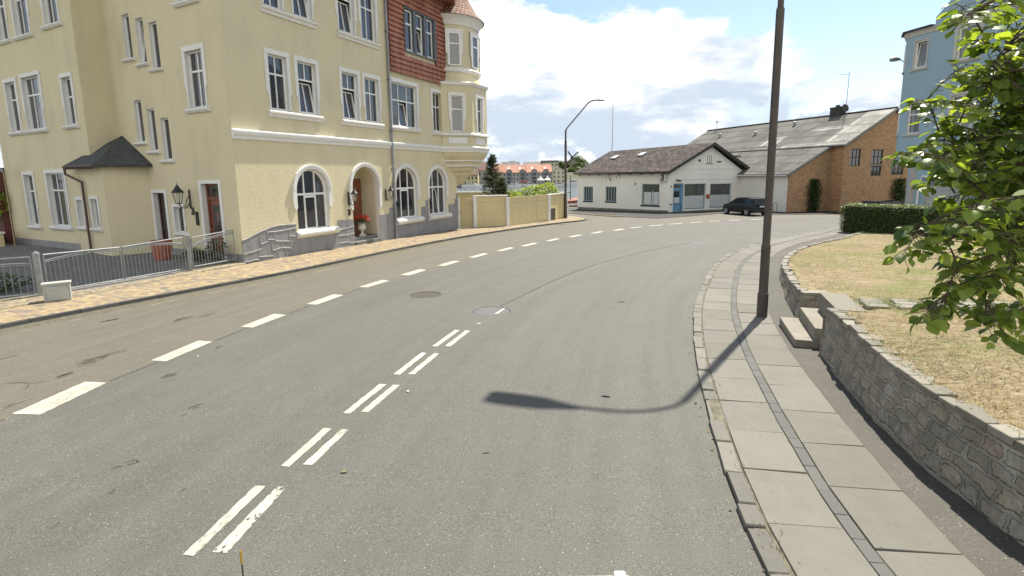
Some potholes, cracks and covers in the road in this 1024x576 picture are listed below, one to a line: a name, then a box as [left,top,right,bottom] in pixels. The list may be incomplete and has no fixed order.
manhole cover [473,307,511,316]
crack [2,349,127,411]
